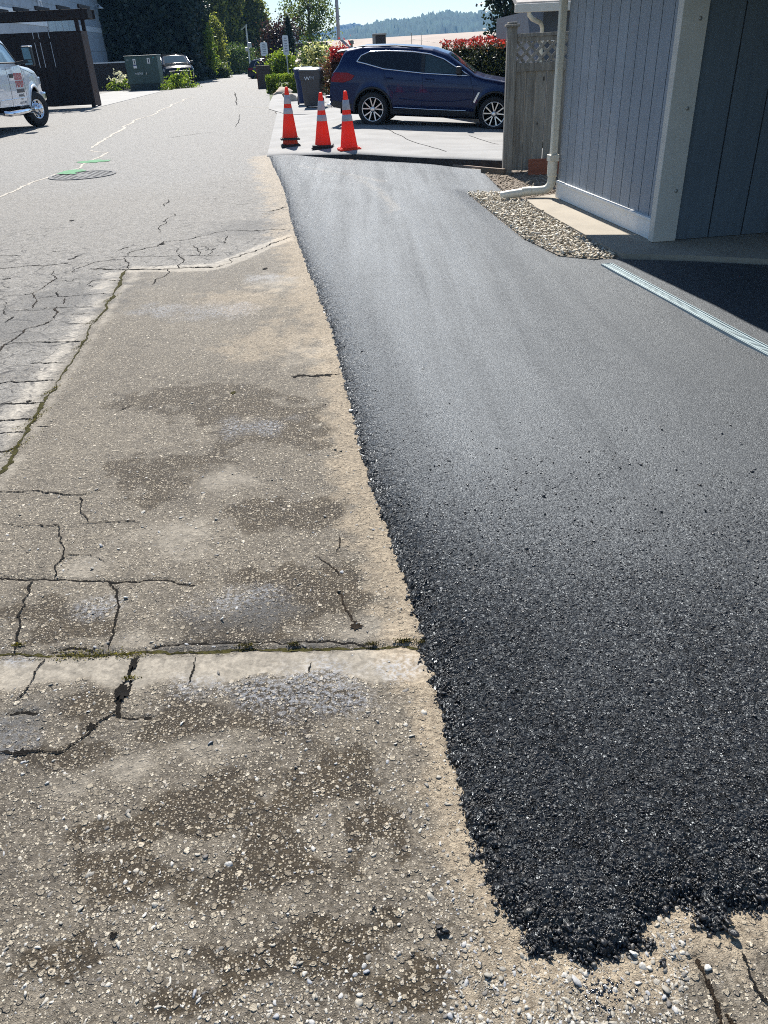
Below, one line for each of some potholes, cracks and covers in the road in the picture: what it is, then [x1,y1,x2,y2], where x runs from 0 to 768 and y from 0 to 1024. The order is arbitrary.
manhole cover [48,170,116,180]
crack [695,952,768,1024]
crack [339,594,355,622]
crack [0,490,194,754]
crack [0,201,291,350]
